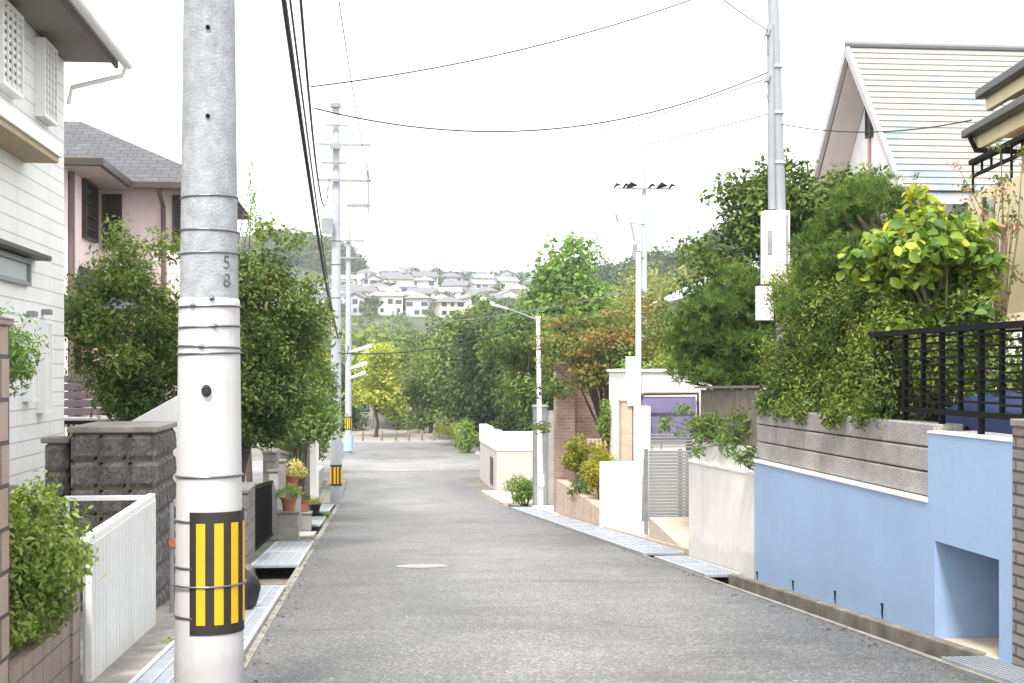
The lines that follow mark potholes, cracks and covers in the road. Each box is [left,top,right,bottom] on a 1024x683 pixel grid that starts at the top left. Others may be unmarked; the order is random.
drain grate [941,656,1024,683]
